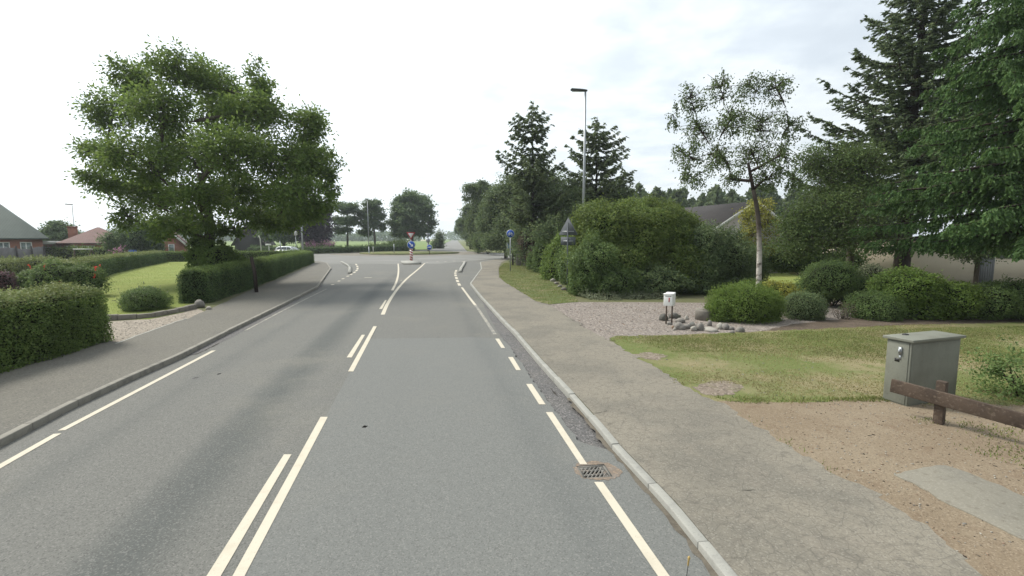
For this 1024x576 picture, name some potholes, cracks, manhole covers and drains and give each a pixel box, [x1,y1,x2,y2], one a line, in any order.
drain grate [577,465,612,479]
